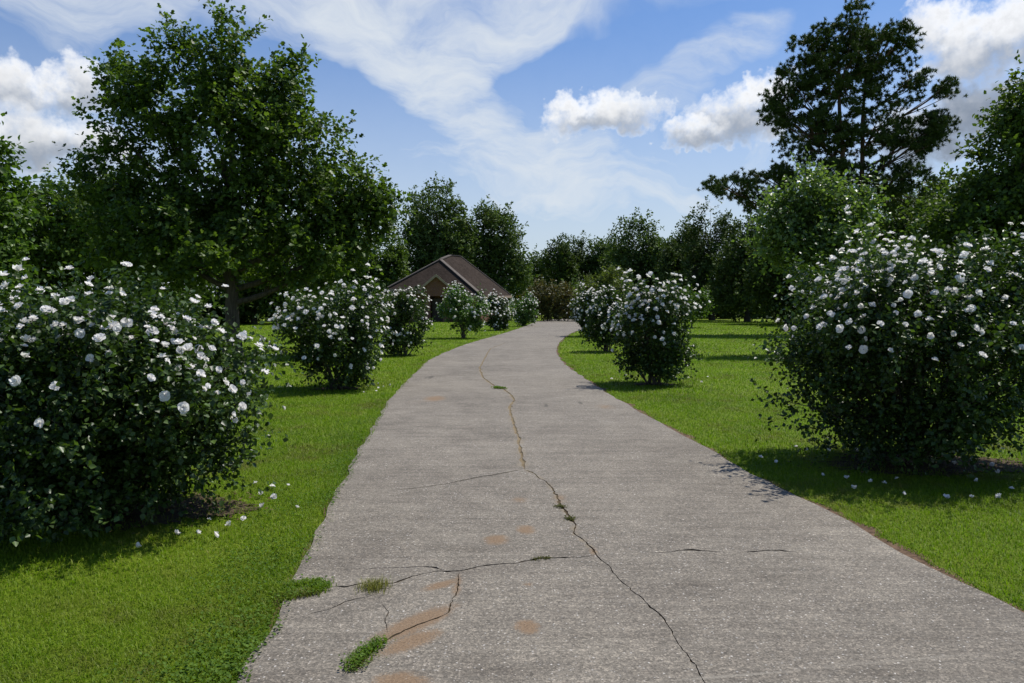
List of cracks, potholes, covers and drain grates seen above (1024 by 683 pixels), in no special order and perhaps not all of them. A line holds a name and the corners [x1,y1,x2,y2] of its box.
crack [315,346,705,683]
